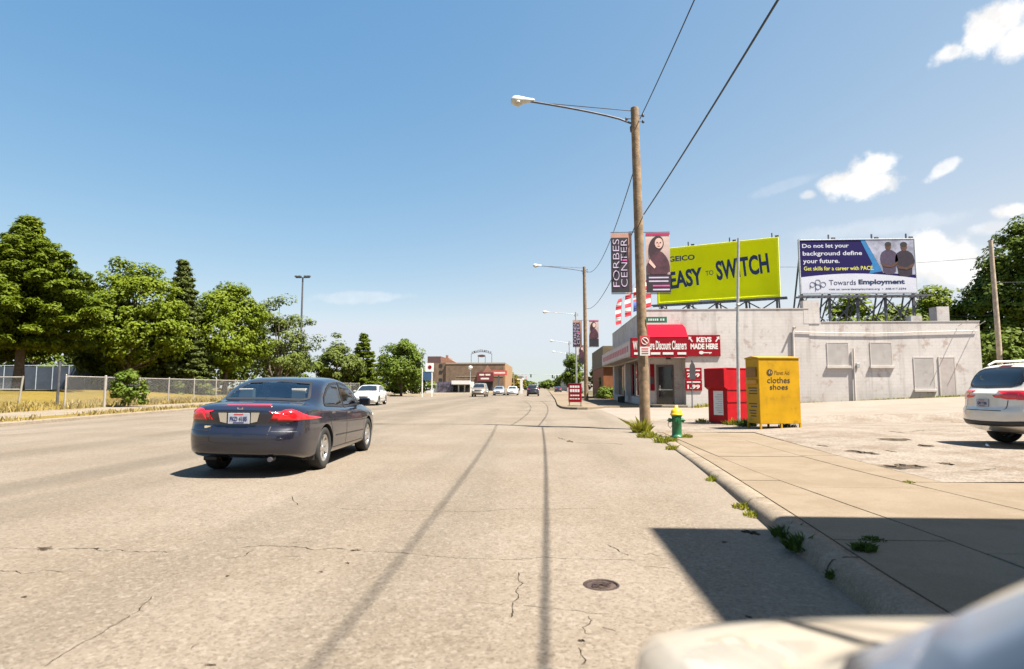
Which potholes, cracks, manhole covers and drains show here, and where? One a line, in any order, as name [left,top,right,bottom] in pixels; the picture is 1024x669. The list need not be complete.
crack [226,541,670,666]
manhole cover [583,579,620,591]
crack [44,595,153,667]
